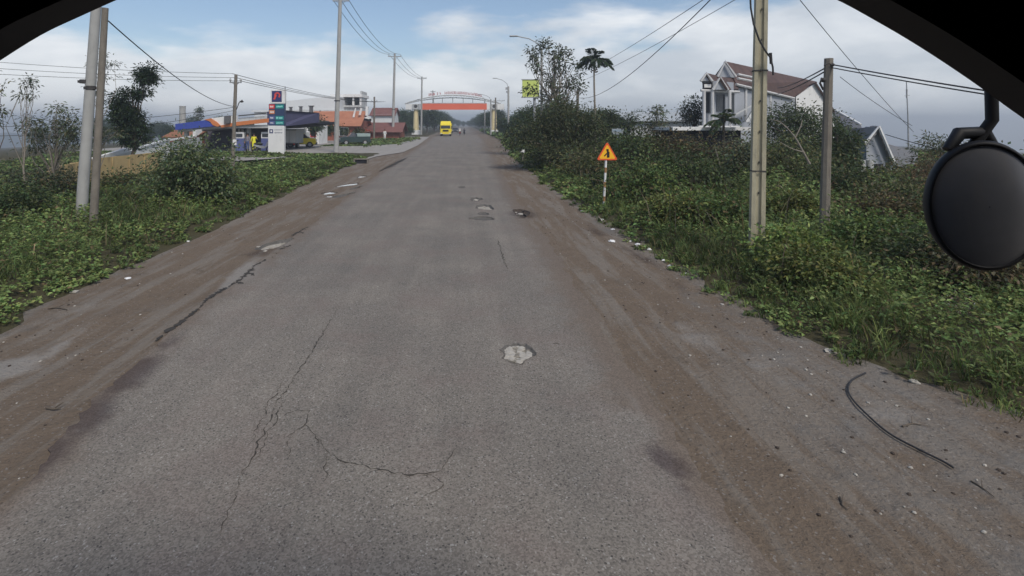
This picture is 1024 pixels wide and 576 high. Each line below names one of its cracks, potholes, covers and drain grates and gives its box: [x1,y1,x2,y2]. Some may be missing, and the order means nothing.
pothole [500,343,537,364]
crack [155,227,309,341]
crack [221,310,455,529]
